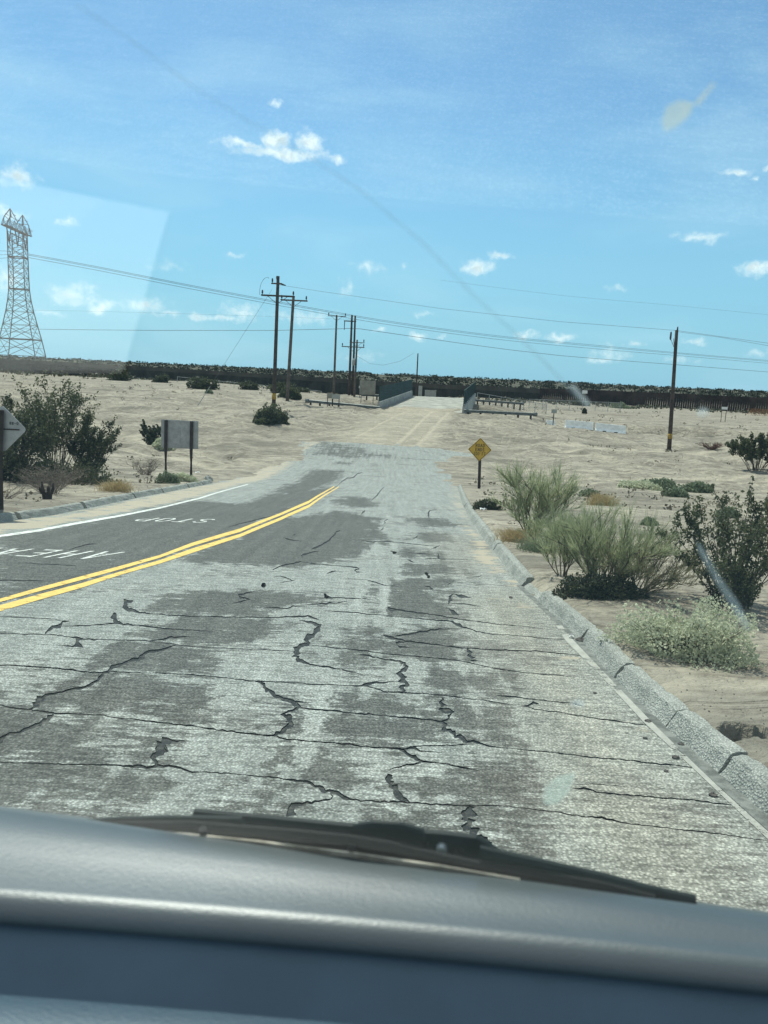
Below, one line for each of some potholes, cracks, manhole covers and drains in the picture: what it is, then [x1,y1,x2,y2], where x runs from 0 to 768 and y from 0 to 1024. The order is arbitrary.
crack [341,472,482,577]
crack [496,695,647,726]
crack [235,531,584,678]
crack [575,783,740,806]
crack [0,613,292,652]
